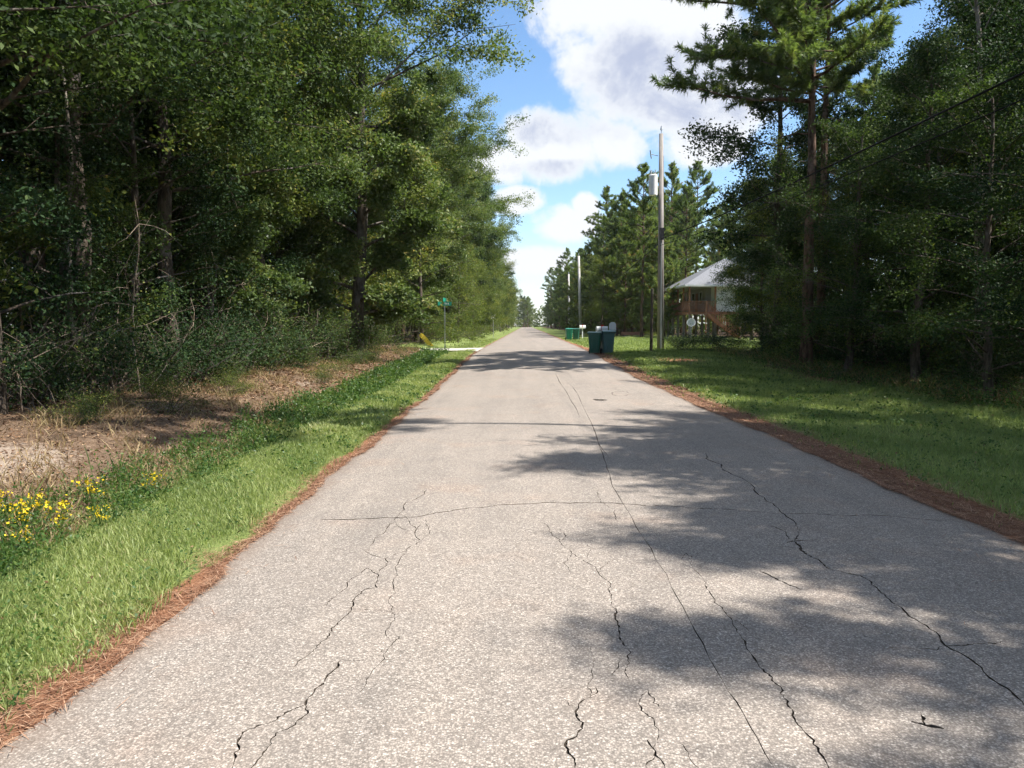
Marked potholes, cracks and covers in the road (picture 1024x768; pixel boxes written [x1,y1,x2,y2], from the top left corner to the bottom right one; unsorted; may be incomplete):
crack [232,447,1024,768]
